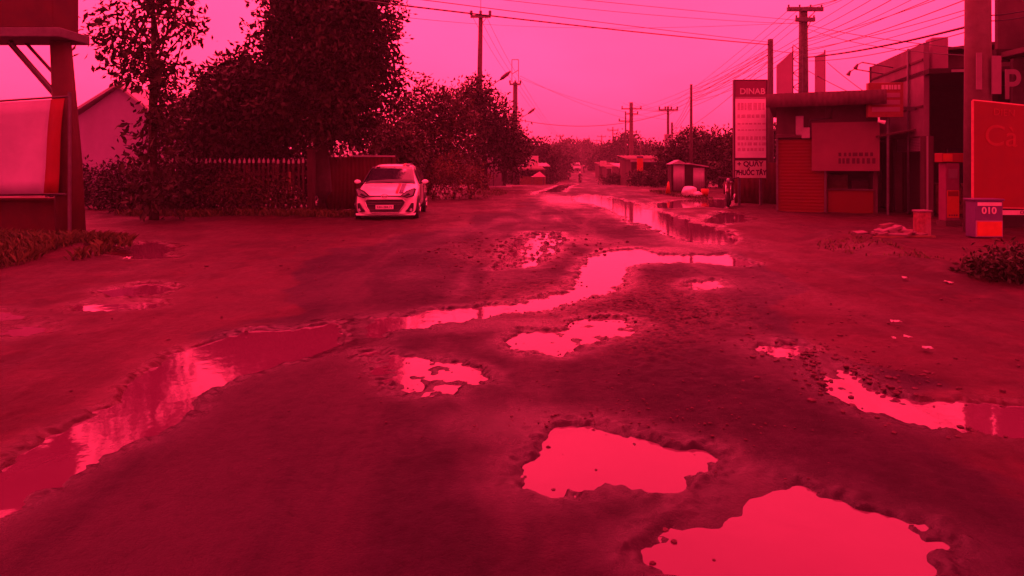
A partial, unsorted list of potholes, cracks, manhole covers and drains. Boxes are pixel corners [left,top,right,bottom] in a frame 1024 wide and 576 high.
pothole [800,355,1024,444]
pothole [483,230,572,270]
pothole [489,413,751,504]
pothole [349,344,506,401]
pothole [608,460,987,576]
pothole [743,336,833,361]
pothole [565,194,749,245]
pothole [306,246,766,348]
pothole [491,313,651,359]
pothole [0,318,357,528]
